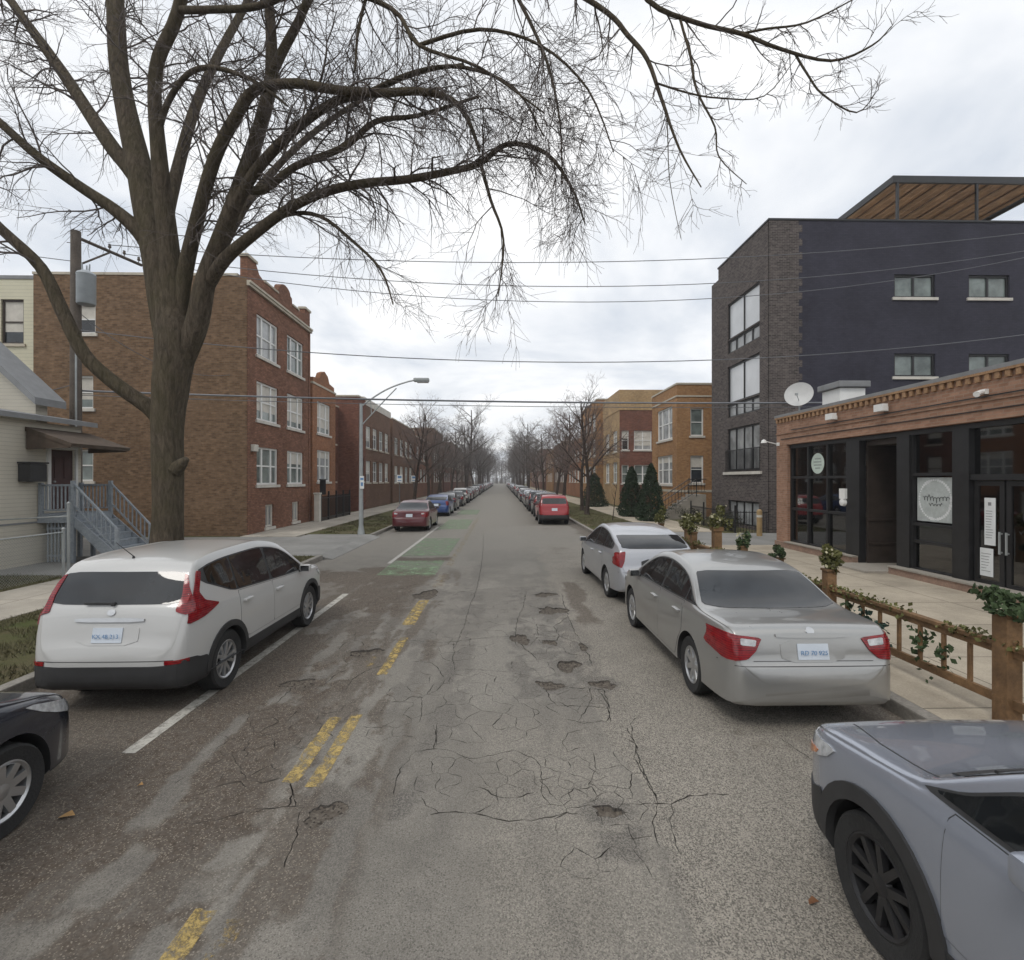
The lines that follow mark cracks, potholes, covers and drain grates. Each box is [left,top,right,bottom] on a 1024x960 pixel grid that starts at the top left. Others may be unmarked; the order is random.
crack [176,585,440,867]
pothole [509,634,530,645]
pothole [557,660,583,673]
pothole [535,681,565,691]
crack [357,539,729,879]
pothole [592,805,627,818]
pothole [413,589,438,600]
pothole [539,606,570,615]
pothole [350,648,385,658]
pothole [588,680,616,690]
pothole [278,678,315,691]
pothole [303,801,349,829]
